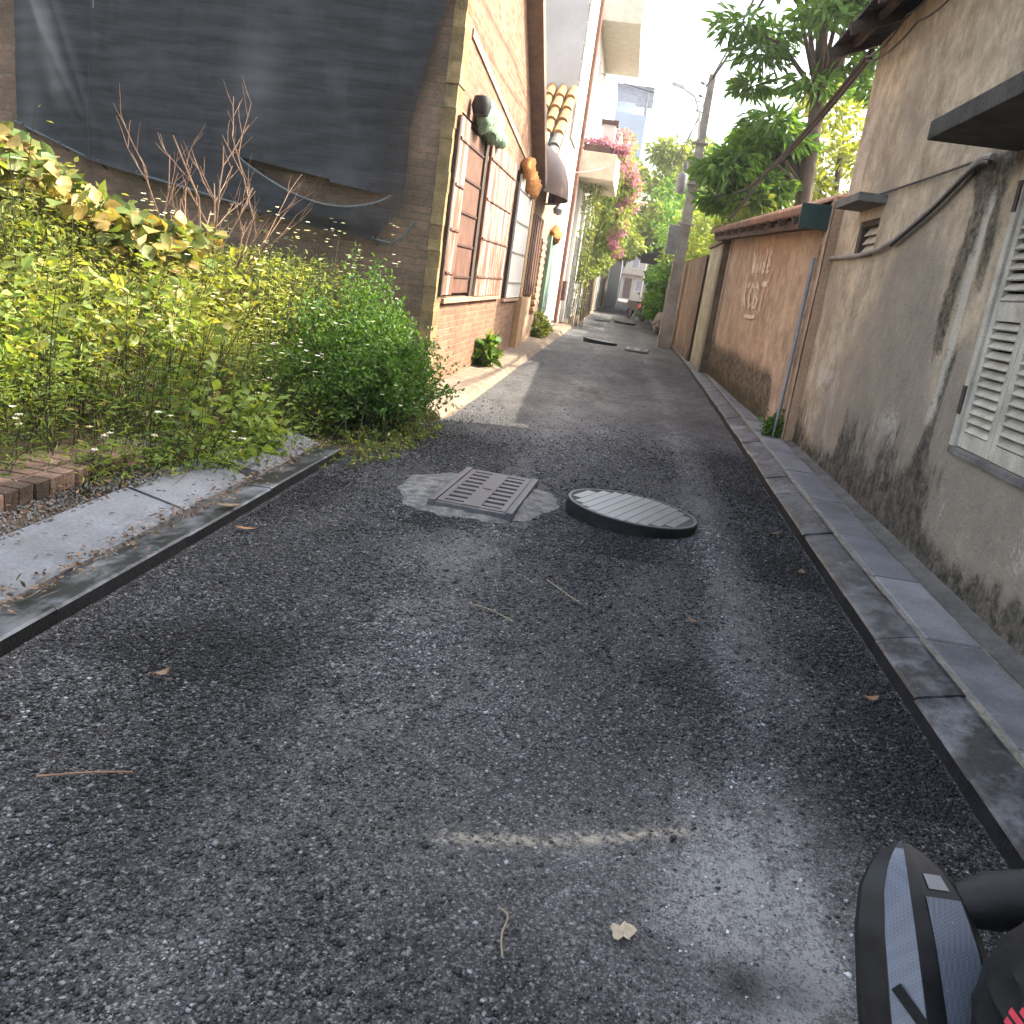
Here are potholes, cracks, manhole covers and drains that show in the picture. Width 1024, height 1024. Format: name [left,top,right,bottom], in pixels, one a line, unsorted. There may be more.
manhole cover [565,489,698,539]
manhole cover [583,337,617,346]
drain grate [397,467,560,523]
